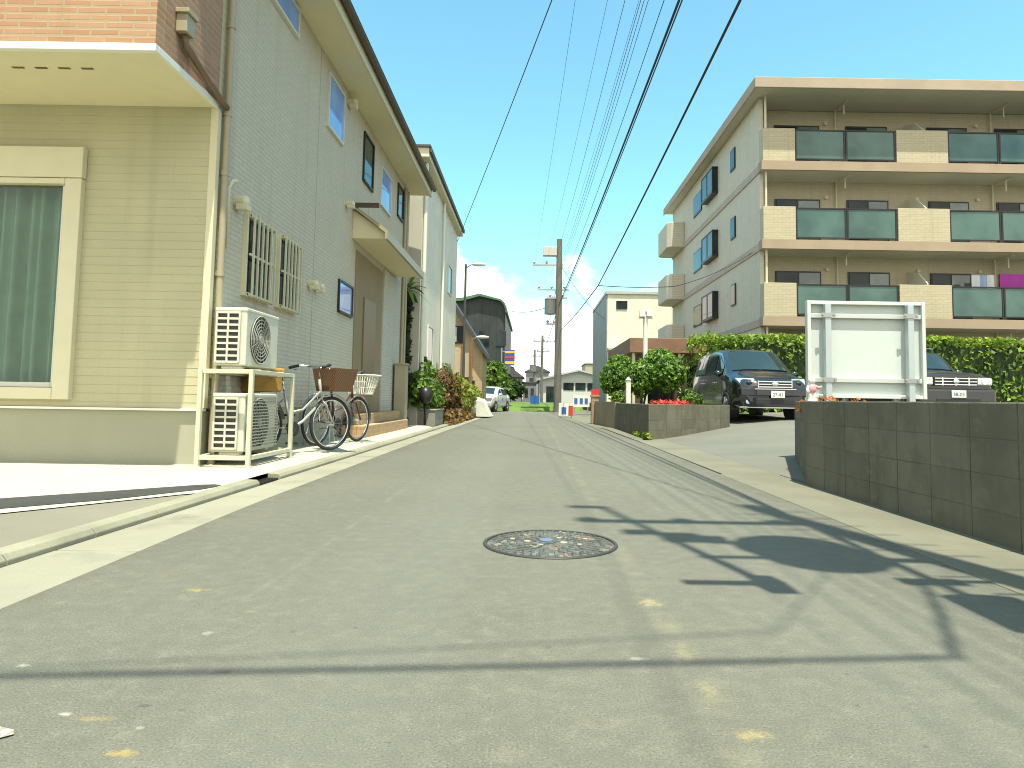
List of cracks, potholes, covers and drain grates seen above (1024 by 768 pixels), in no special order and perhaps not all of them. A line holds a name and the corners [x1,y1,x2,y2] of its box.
manhole cover [483,530,618,560]
